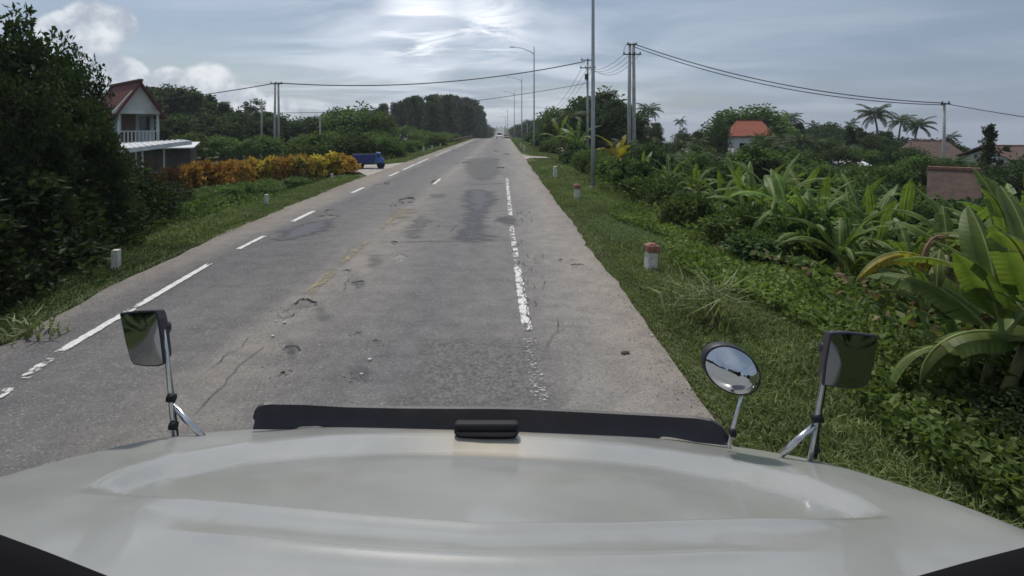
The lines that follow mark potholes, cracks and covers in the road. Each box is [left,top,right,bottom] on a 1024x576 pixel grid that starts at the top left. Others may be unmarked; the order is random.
pothole [289,298,317,312]
pothole [283,345,301,356]
